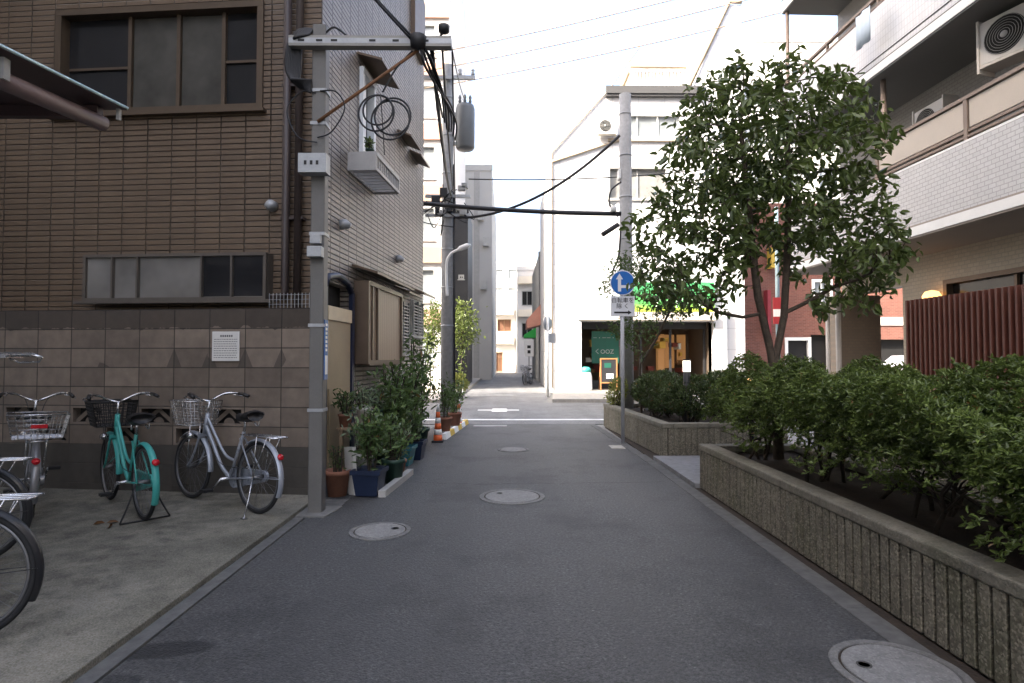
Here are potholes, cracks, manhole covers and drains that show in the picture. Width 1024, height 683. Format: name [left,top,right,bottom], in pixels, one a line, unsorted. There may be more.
manhole cover [828,640,975,683]
manhole cover [349,522,411,541]
manhole cover [479,489,545,505]
